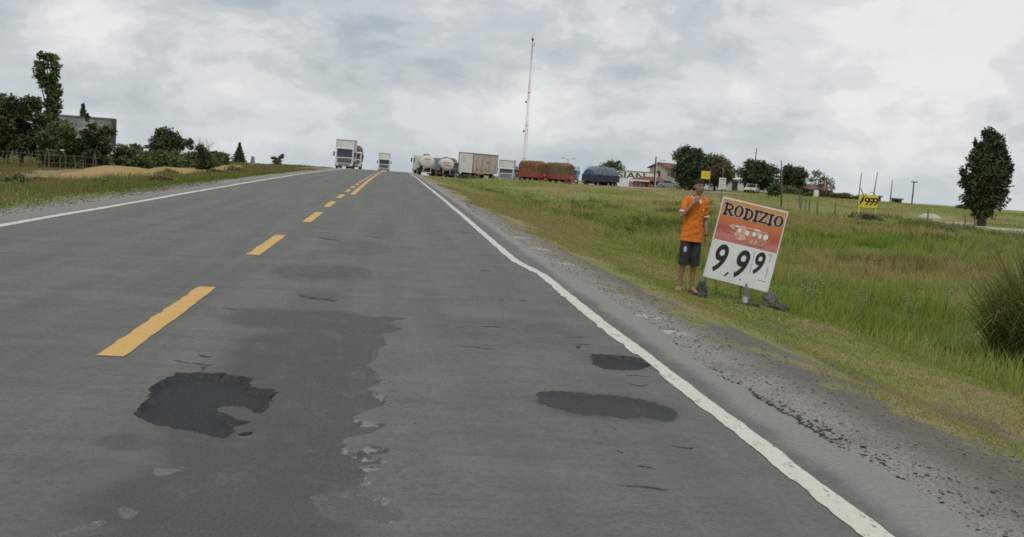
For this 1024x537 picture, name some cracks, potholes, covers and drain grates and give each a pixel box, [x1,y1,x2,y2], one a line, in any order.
pothole [133,372,279,439]
crack [595,426,673,491]
crack [174,355,213,371]
